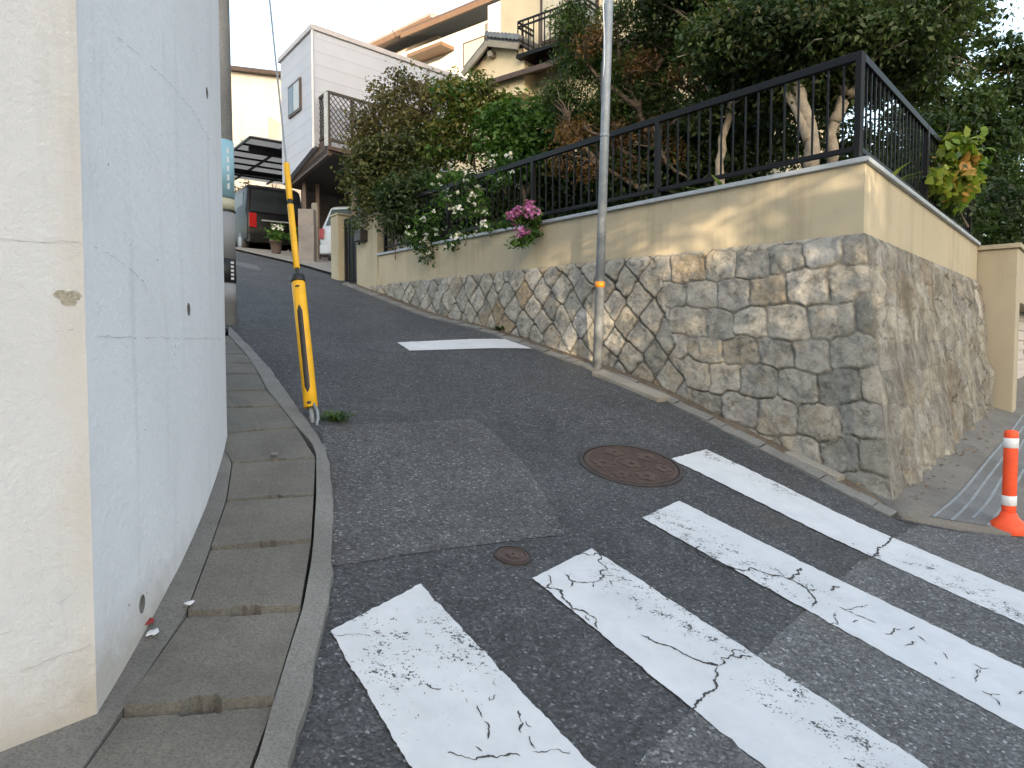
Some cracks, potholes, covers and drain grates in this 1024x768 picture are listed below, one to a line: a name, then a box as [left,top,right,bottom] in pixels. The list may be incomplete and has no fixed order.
manhole cover [494,545,532,566]
manhole cover [579,444,684,488]
crack [861,534,894,560]
crack [642,635,752,712]
crack [427,673,570,760]
crack [685,544,926,645]
crack [545,548,613,628]
